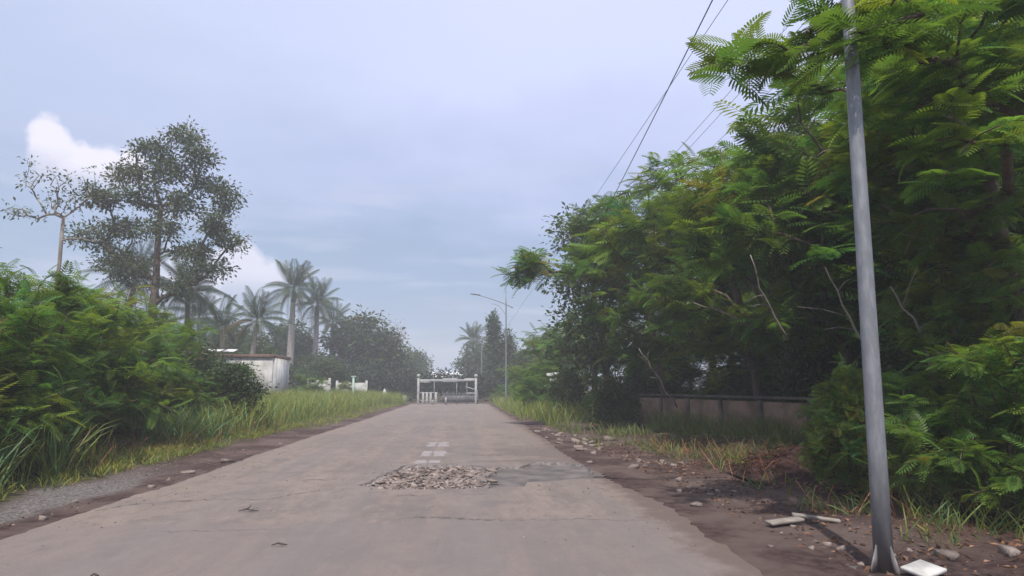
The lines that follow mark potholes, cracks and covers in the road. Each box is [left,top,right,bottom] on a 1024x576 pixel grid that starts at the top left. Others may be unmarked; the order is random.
pothole [359,464,490,489]
